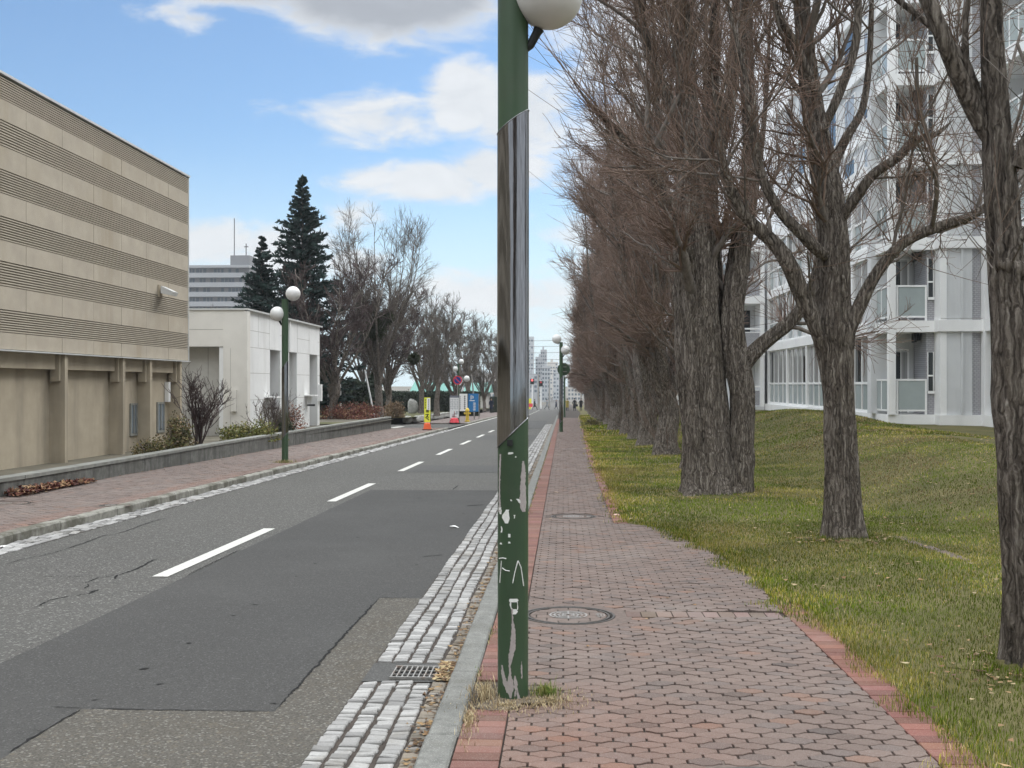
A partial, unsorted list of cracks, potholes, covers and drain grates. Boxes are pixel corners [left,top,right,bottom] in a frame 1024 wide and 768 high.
crack [36,559,156,607]
drain grate [389,665,450,680]
manhole cover [528,604,632,629]
